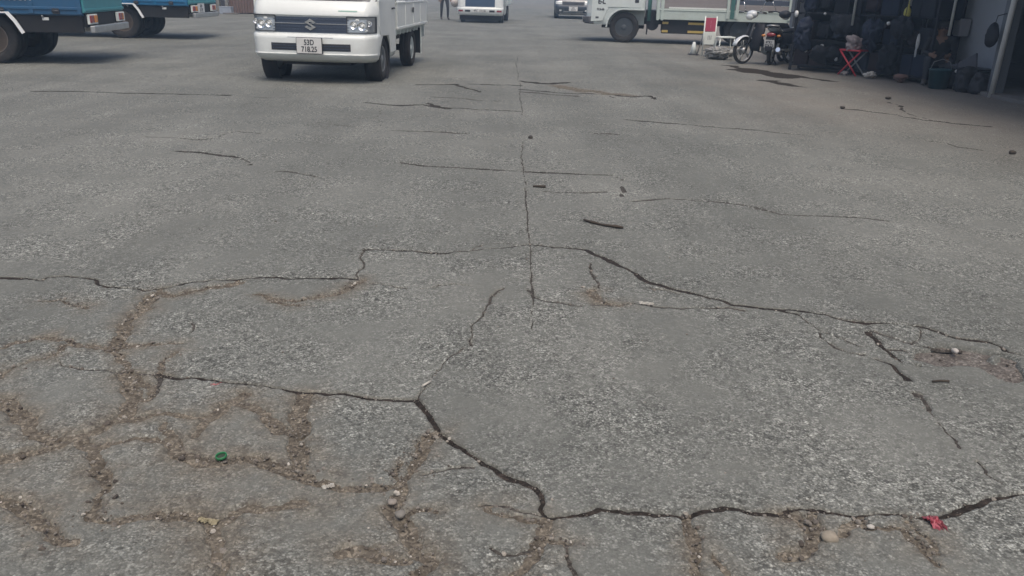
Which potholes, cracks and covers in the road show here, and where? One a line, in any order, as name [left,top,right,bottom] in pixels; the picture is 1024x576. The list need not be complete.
crack [0,244,1024,576]
crack [846,102,992,127]
crack [157,131,316,177]
crack [400,162,889,222]
crack [333,81,657,134]
